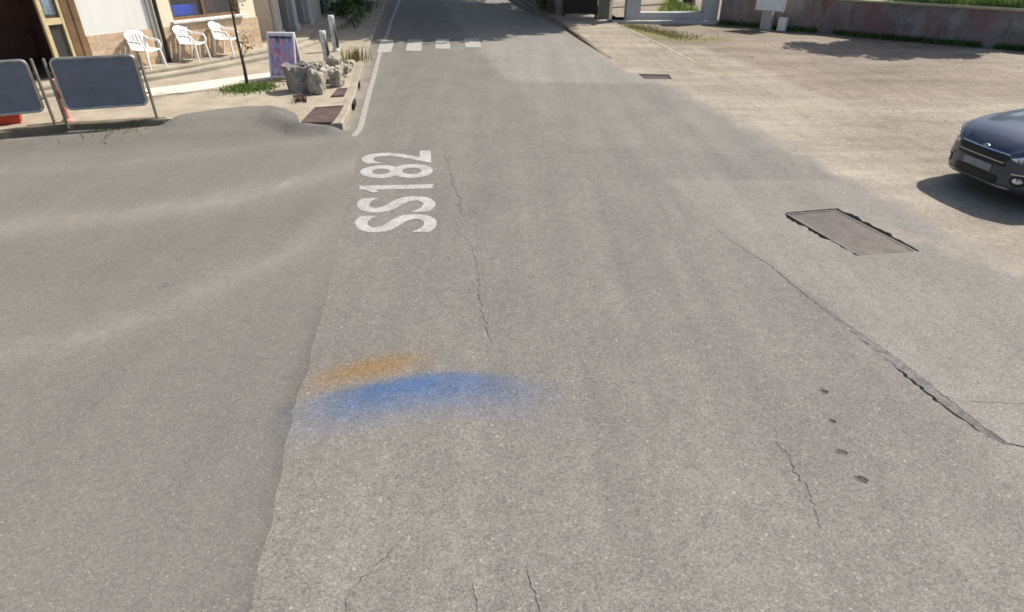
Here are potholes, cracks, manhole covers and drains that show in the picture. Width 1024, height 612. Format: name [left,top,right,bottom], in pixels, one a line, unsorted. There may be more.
crack [526,562,540,612]
crack [465,233,490,341]
crack [344,536,404,612]
manhole cover [784,208,918,256]
crack [716,229,1024,530]
